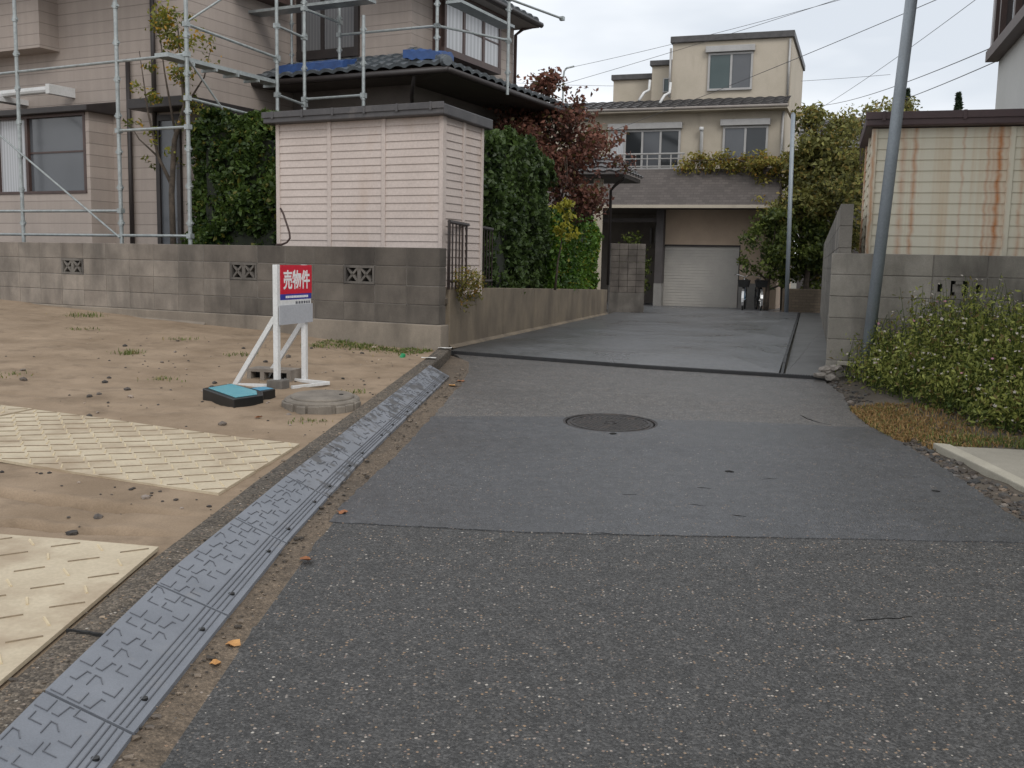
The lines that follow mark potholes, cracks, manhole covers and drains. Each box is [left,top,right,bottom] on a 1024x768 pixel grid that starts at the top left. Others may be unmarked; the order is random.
manhole cover [563,413,658,432]
manhole cover [281,390,361,415]
